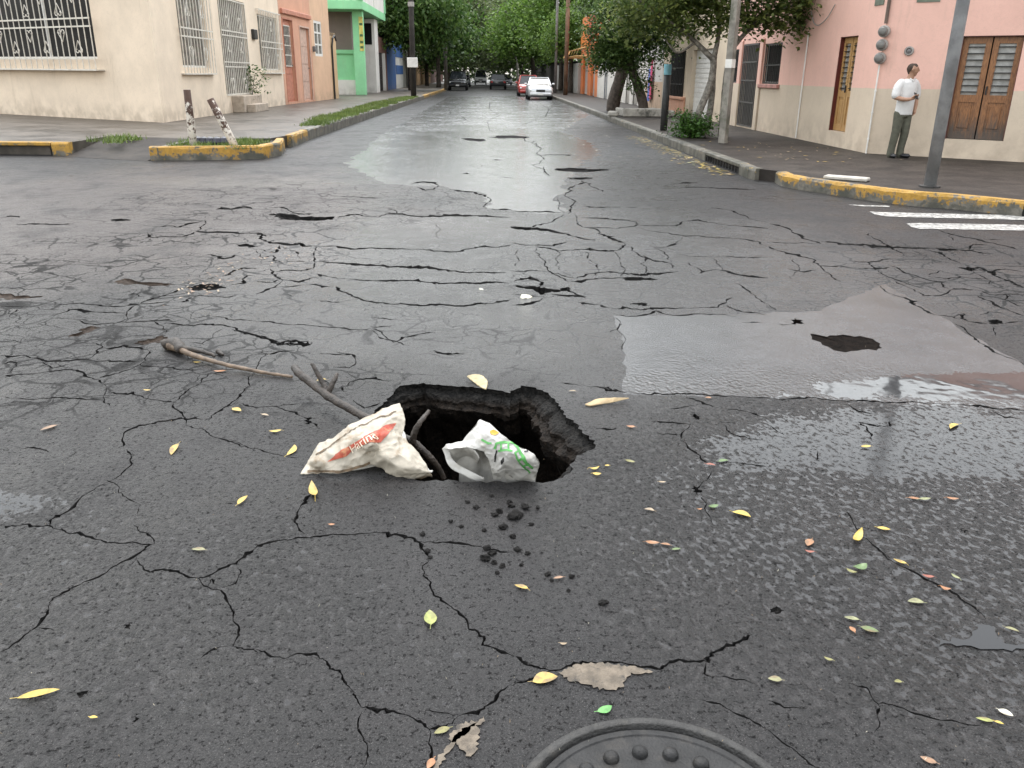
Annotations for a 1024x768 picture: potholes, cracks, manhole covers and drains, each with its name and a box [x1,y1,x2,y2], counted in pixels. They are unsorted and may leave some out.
crack [257,269,283,294]
crack [257,649,352,690]
crack [2,216,68,225]
crack [769,247,839,281]
crack [678,182,754,190]
crack [591,228,624,243]
crack [516,296,553,306]
drain grate [706,151,746,174]
crack [449,189,511,210]
crack [848,683,979,733]
pothole [810,334,881,352]
crack [631,247,674,268]
